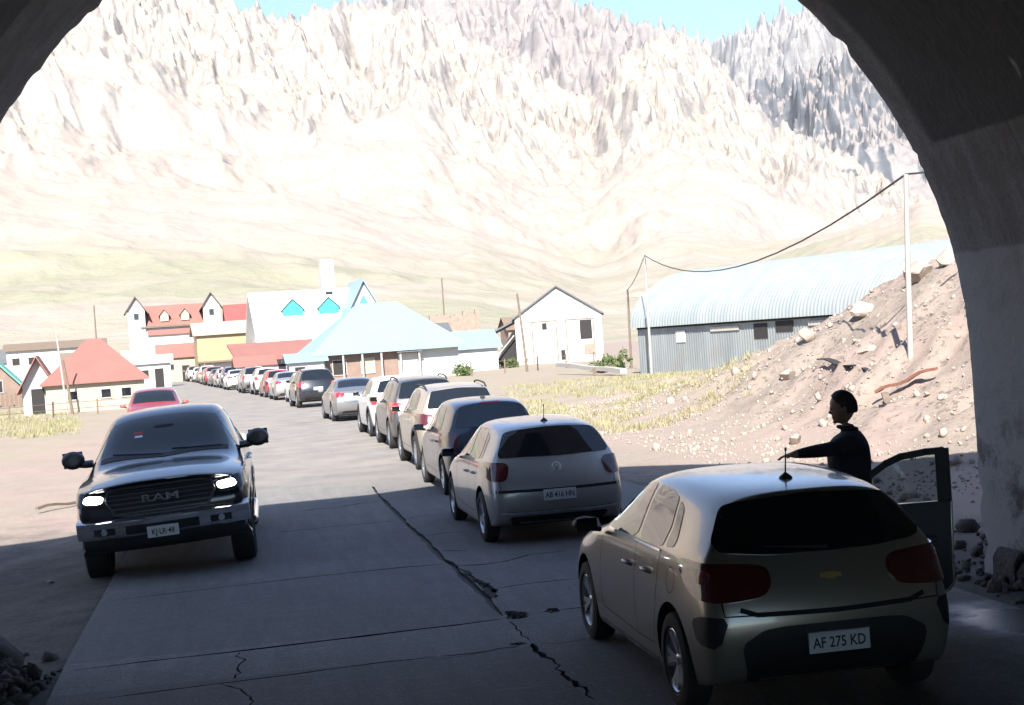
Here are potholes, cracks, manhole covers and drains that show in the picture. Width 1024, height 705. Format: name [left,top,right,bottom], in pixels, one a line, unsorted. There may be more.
crack [428,531,559,569]
crack [97,607,595,705]
pothole [504,611,529,621]
